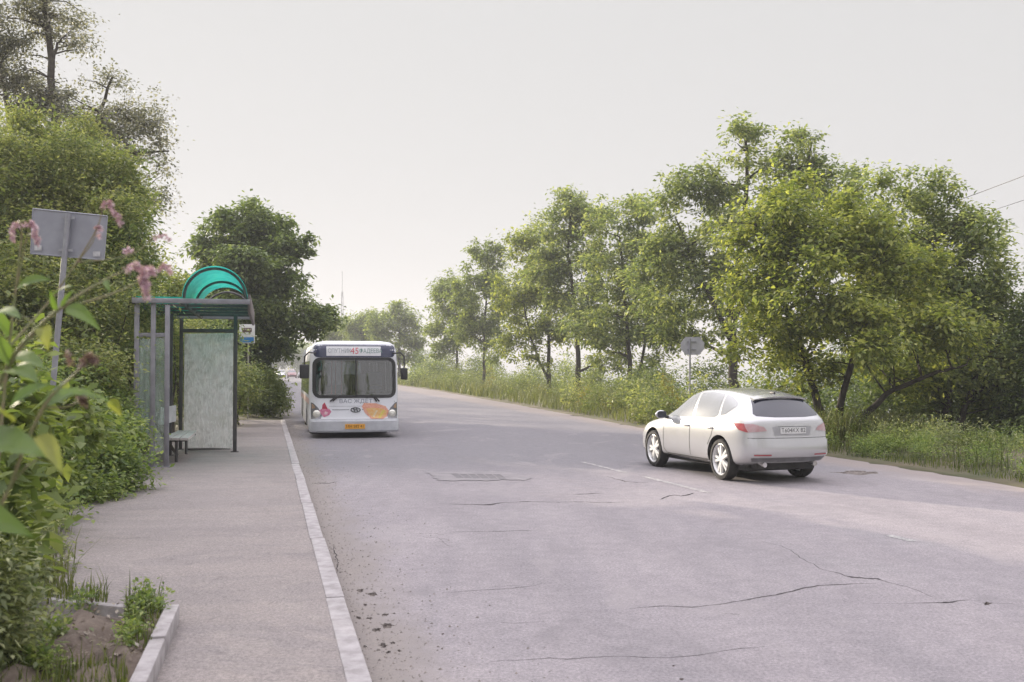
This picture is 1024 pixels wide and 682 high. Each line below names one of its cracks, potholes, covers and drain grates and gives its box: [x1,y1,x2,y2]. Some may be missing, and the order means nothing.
crack [630,542,932,615]
crack [464,477,639,505]
crack [492,646,765,662]
